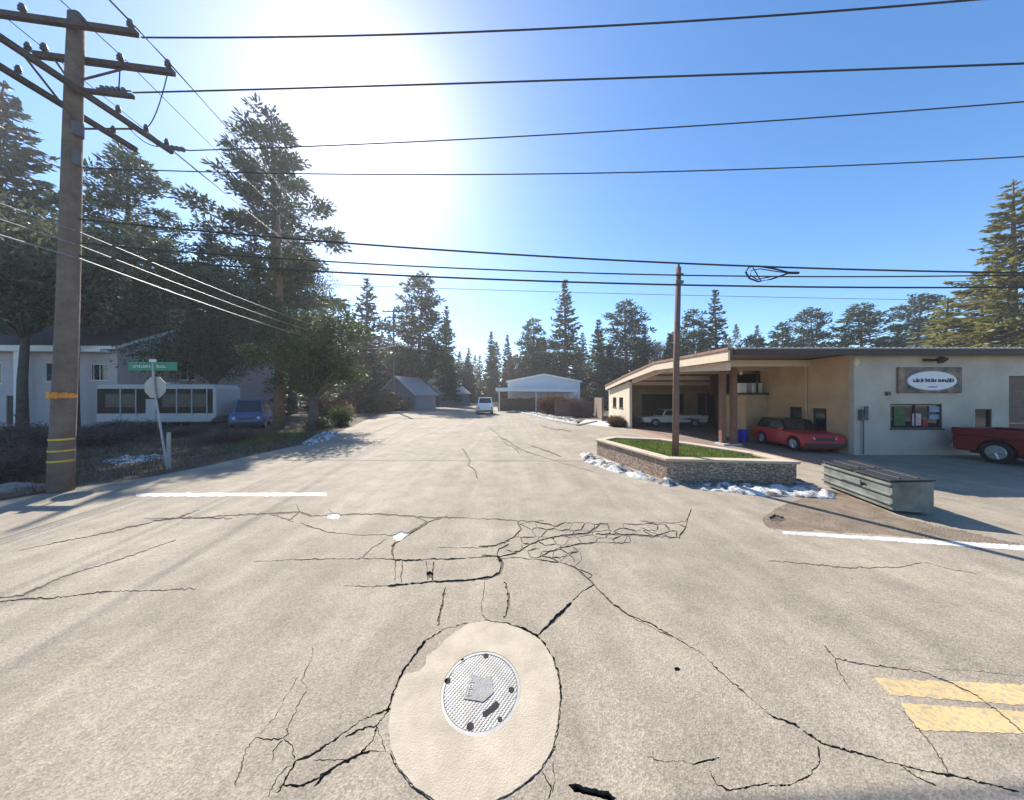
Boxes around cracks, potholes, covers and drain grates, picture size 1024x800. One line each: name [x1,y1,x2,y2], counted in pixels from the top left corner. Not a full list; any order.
manhole cover [441,652,520,736]
crack [0,506,1024,800]
pothole [568,783,617,800]
